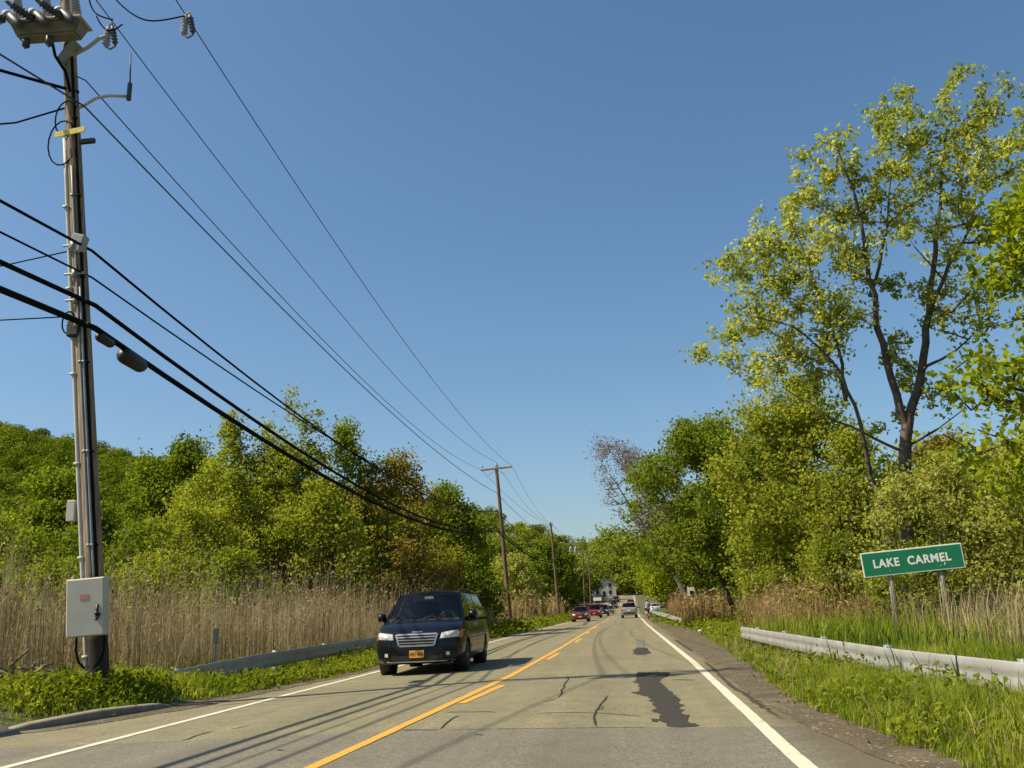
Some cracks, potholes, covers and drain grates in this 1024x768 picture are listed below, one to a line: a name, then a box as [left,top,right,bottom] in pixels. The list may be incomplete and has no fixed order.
crack [400,678,639,735]
